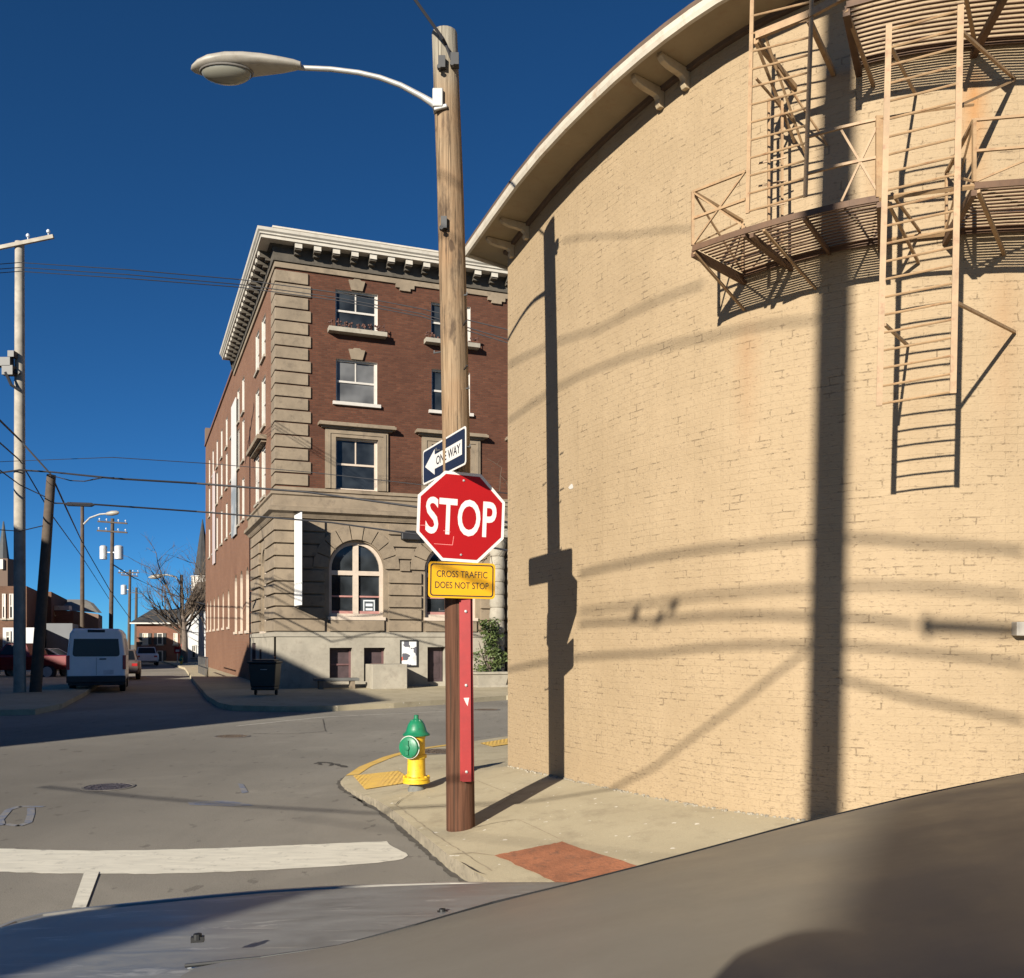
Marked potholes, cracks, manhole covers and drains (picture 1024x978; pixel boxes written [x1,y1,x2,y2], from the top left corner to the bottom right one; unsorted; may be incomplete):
manhole cover [80,783,136,791]
